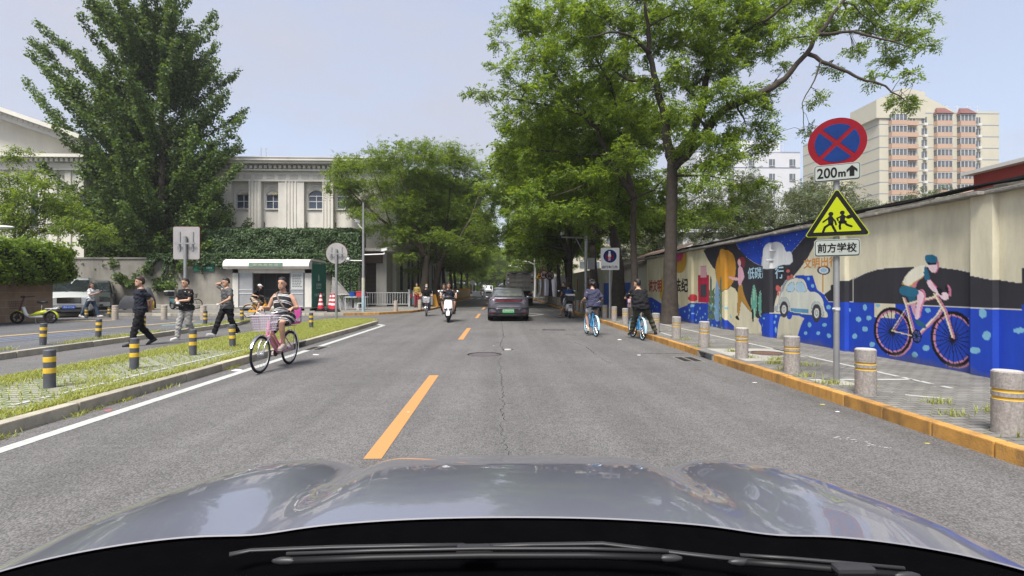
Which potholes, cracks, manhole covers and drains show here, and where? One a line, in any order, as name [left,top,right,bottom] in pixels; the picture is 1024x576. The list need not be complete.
crack [497,318,528,455]
